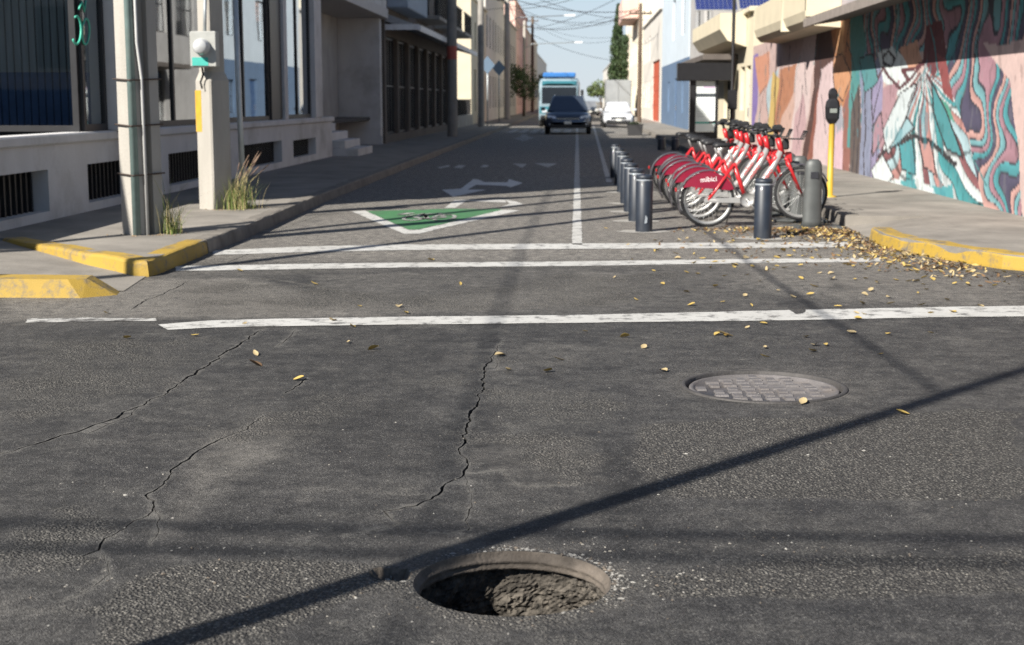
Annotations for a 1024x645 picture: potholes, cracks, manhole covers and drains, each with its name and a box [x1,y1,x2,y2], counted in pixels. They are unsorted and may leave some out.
manhole cover [681,370,848,404]
crack [3,329,264,454]
crack [43,417,262,600]
crack [343,346,582,537]
